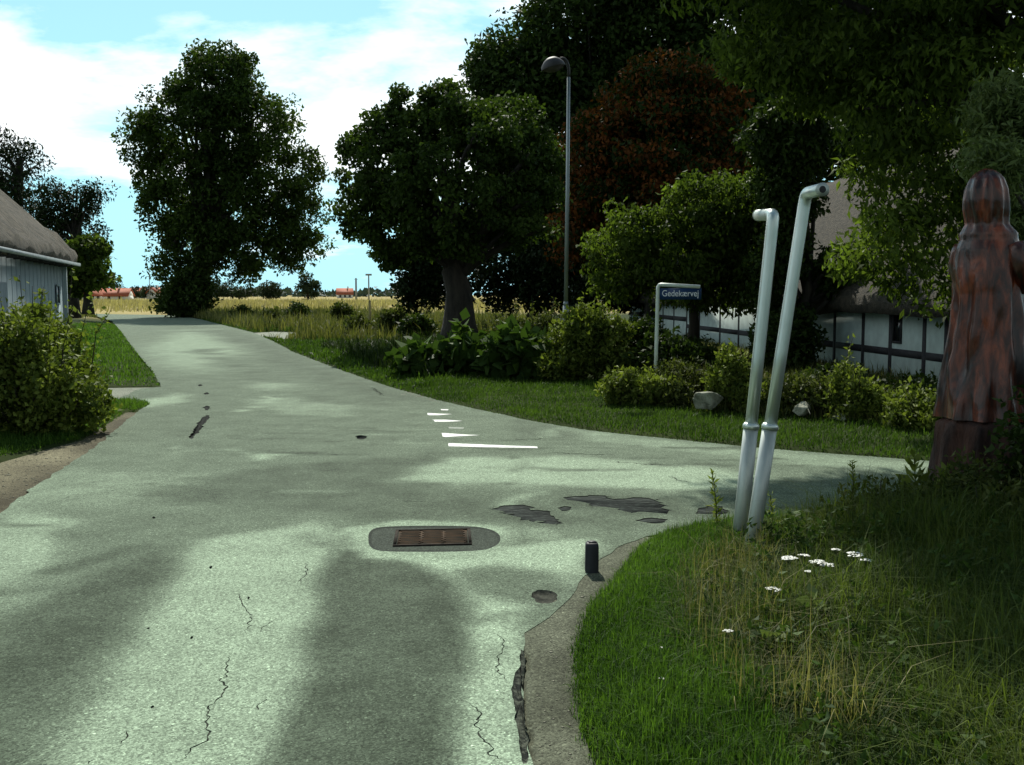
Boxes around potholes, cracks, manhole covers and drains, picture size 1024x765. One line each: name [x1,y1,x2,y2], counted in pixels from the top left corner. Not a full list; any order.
crack [178,653,236,762]
crack [469,703,515,760]
crack [495,635,505,679]
